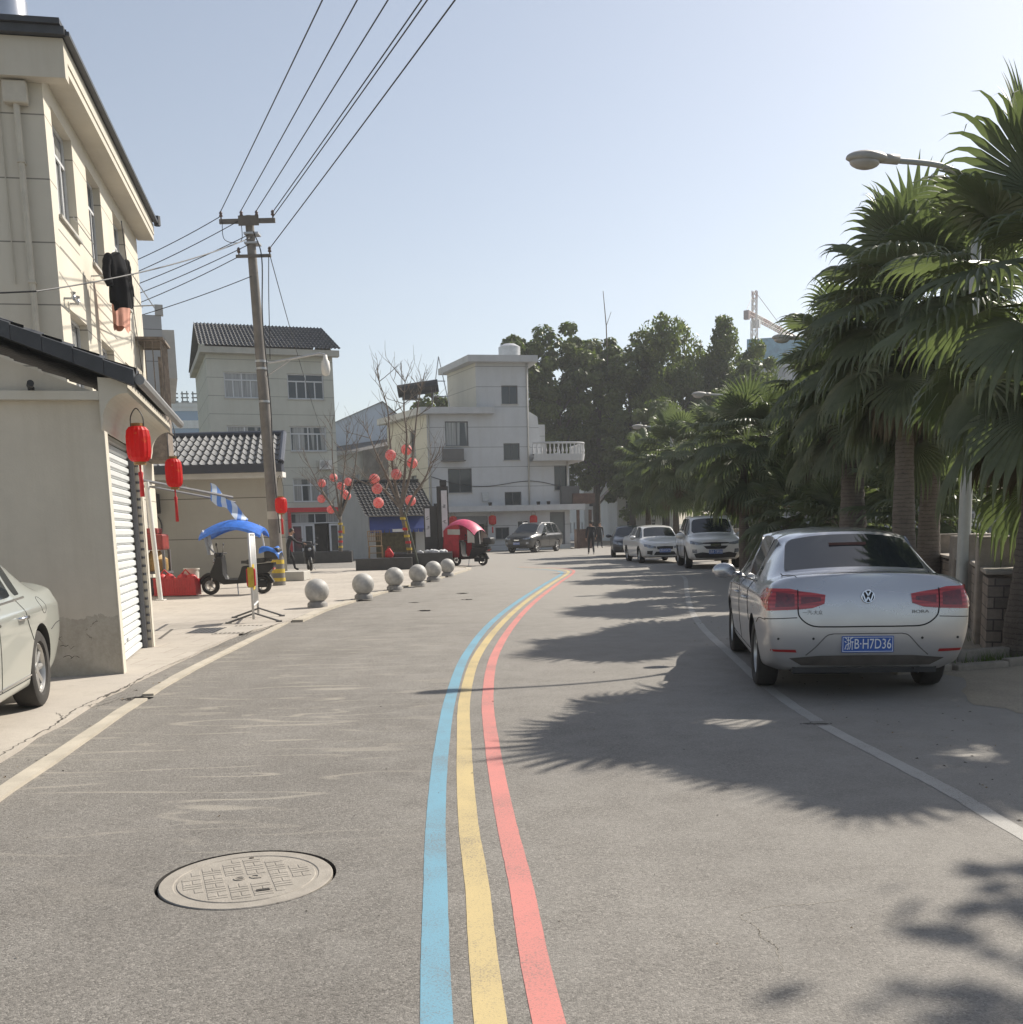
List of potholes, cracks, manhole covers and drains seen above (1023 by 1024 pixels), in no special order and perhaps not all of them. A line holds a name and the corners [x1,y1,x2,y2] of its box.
manhole cover [154,850,336,911]
crack [740,897,865,971]
